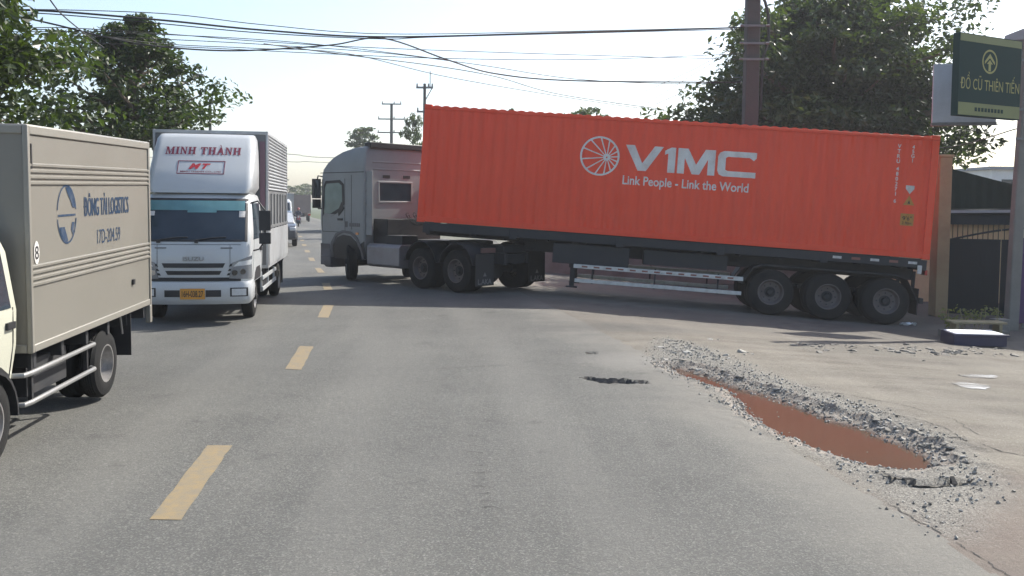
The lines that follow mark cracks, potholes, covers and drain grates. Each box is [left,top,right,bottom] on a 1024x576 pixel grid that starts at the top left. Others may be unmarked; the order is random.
pothole [579,376,648,384]
pothole [651,361,961,471]
crack [889,504,1010,576]
